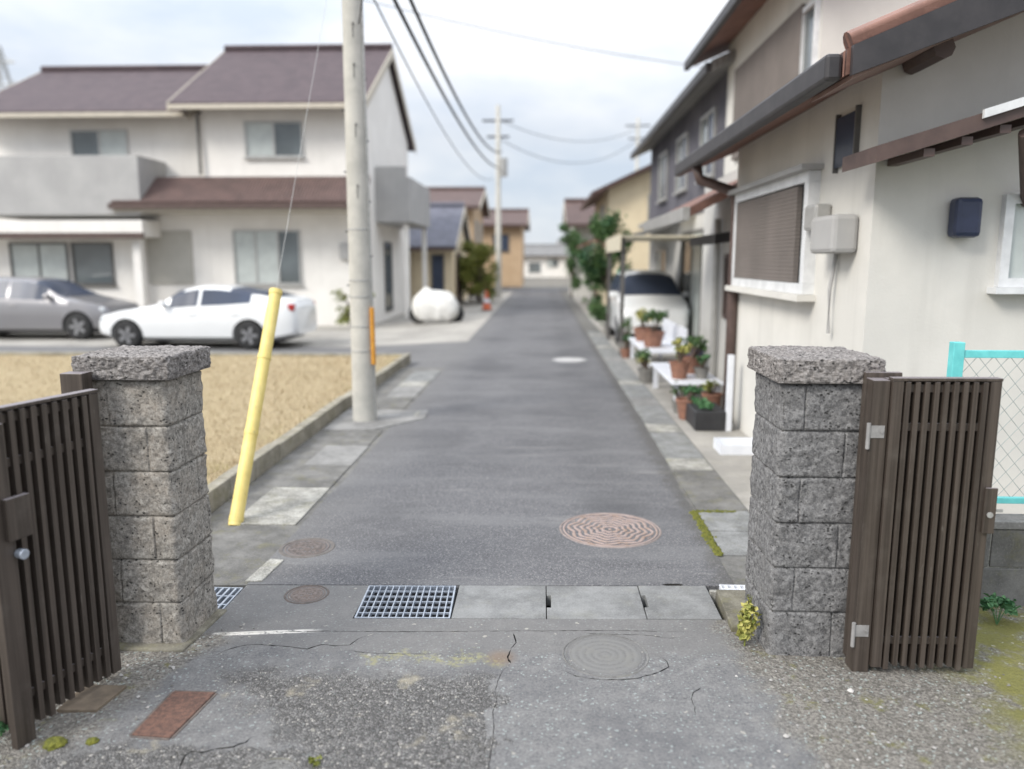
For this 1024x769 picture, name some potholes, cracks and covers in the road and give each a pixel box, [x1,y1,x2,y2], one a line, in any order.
crack [488,634,516,769]
crack [179,739,249,769]
crack [226,639,392,654]
manhole cover [284,585,330,604]
drain grate [214,587,243,609]
drain grate [354,585,456,619]
manhole cover [559,513,662,548]
manhole cover [562,634,649,678]
manhole cover [279,538,335,558]
